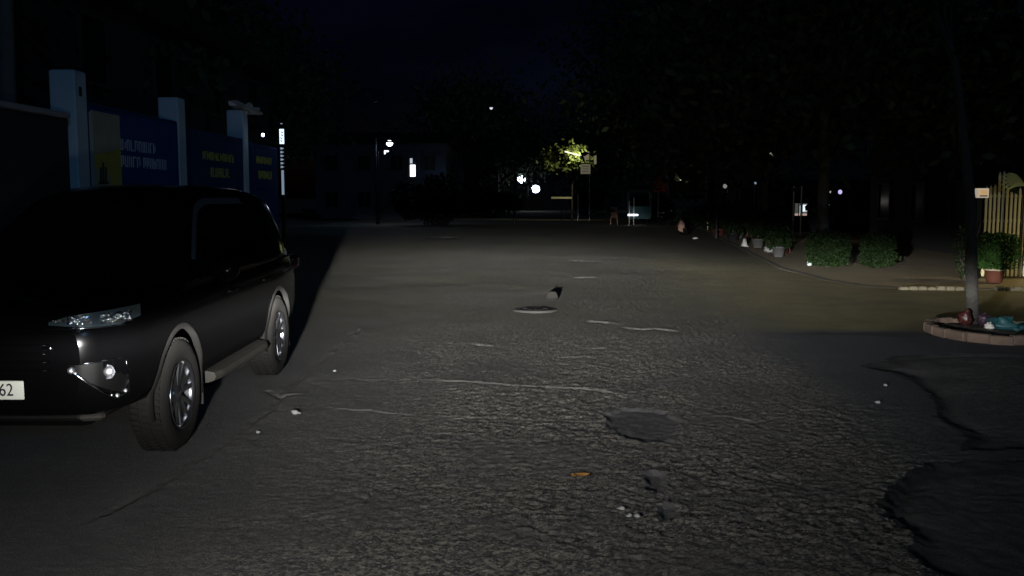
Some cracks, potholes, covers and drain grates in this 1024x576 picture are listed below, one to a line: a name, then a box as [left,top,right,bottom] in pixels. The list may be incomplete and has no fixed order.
pothole [655,501,678,523]
crack [555,320,678,359]
crack [263,379,615,423]
pothole [601,408,684,443]
pothole [638,469,669,491]
